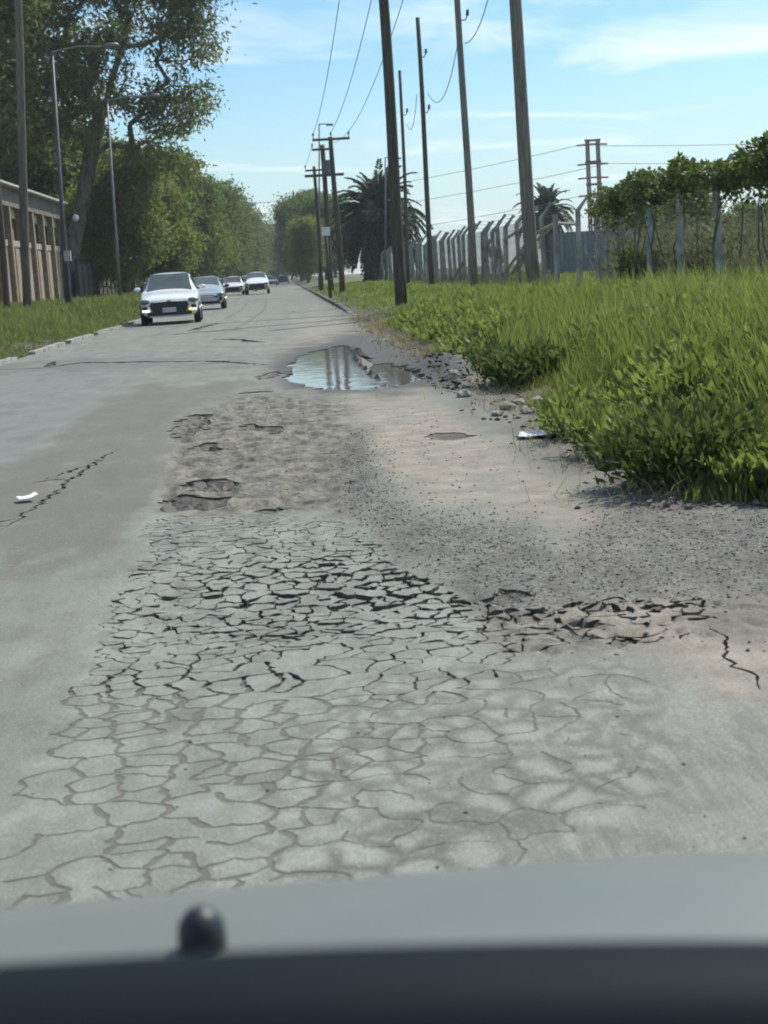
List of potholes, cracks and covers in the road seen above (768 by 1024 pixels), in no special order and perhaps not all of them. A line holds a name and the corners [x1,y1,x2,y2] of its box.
pothole [179,478,239,493]
crack [709,626,760,689]
pothole [423,432,477,440]
pothole [281,345,425,390]
crack [188,323,258,342]
pothole [166,414,216,440]
pothole [187,442,229,452]
crack [0,515,718,908]
pothole [239,423,285,433]
crack [0,449,119,529]
pothole [157,494,233,513]
